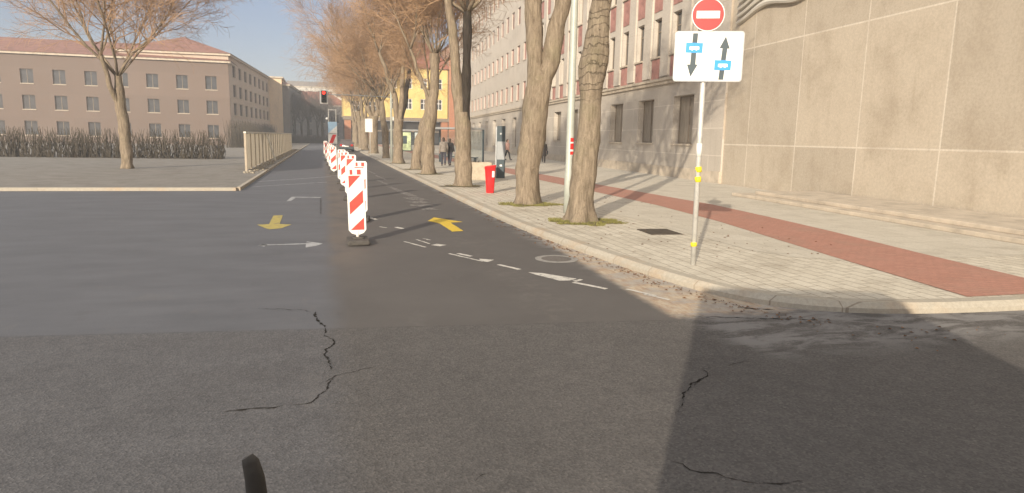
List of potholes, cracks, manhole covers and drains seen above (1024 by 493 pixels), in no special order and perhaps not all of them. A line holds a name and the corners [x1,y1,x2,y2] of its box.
crack [673,461,803,484]
crack [675,361,744,413]
crack [224,308,379,412]
